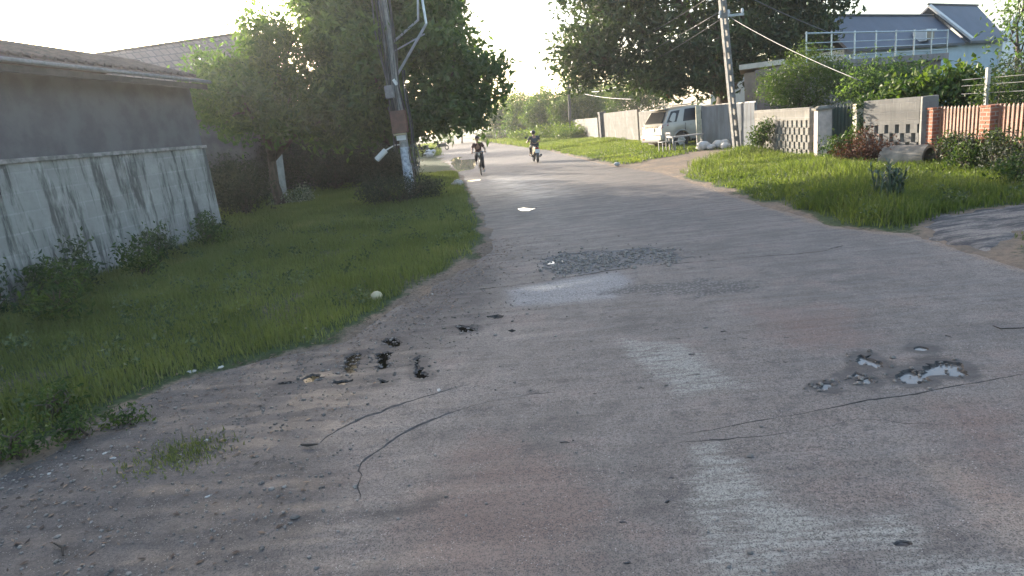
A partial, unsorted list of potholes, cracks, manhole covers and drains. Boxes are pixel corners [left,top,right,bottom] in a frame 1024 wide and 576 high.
crack [682,374,1022,442]
pothole [803,379,843,392]
pothole [883,357,968,390]
pothole [409,352,433,379]
crack [320,385,550,497]
pothole [846,349,896,369]
pothole [366,351,397,370]
pothole [838,373,878,385]
pothole [340,352,371,376]
pothole [376,337,409,348]
